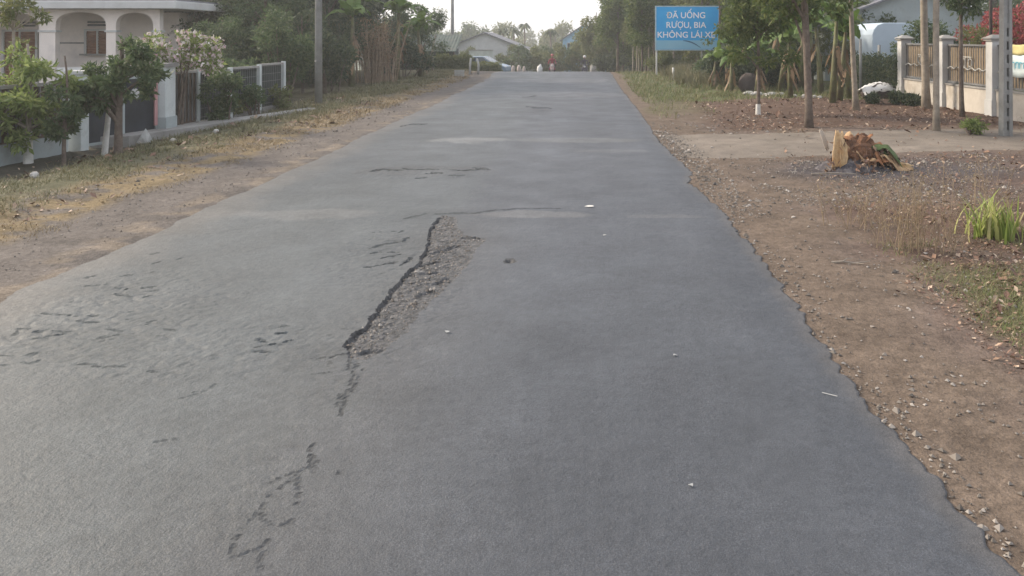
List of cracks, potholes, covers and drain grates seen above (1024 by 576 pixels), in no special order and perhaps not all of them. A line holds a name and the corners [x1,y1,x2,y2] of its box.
crack [250,325,294,353]
pothole [342,215,487,360]
crack [227,442,343,570]
crack [311,353,368,416]
crack [363,208,562,268]
crack [0,252,185,373]
